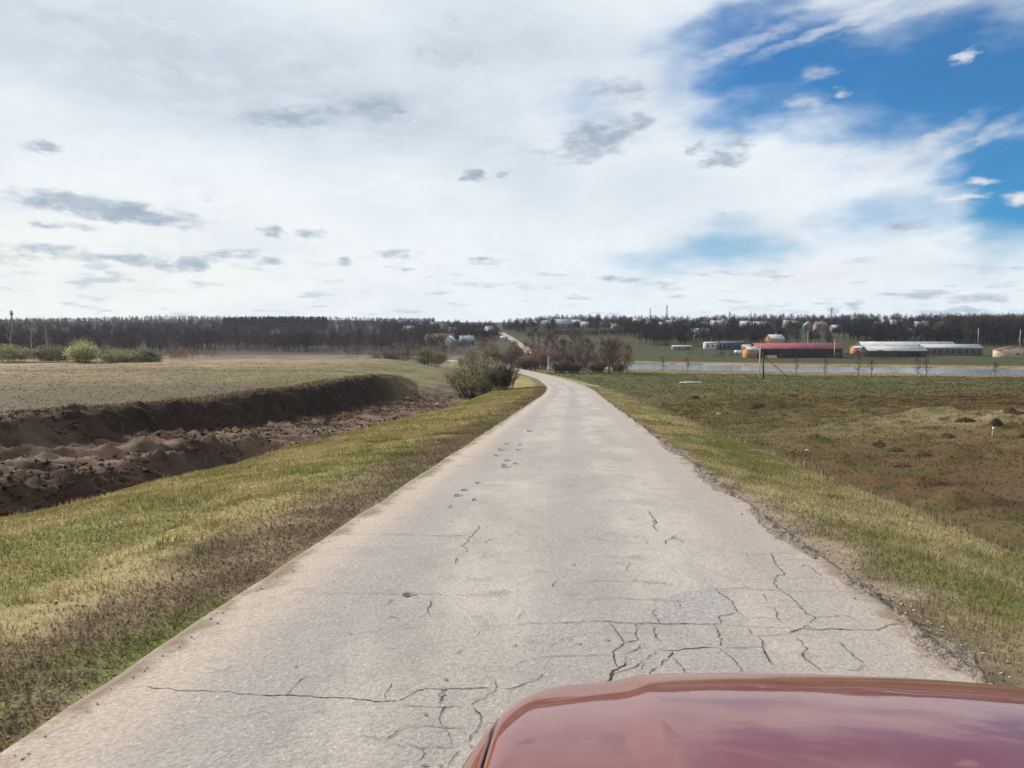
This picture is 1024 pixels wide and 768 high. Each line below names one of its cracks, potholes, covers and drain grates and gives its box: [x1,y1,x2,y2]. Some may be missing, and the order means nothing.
crack [135,552,915,765]
